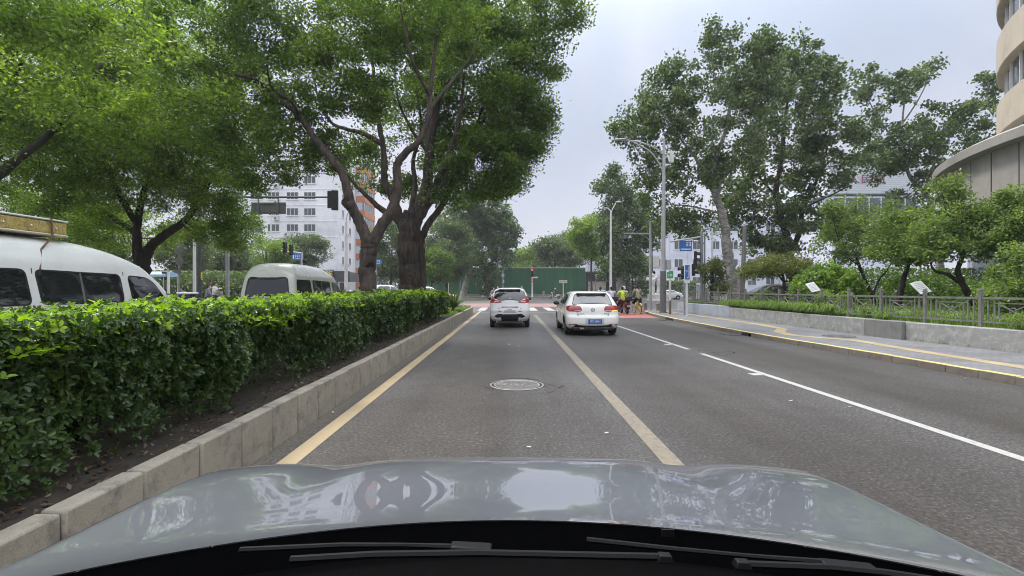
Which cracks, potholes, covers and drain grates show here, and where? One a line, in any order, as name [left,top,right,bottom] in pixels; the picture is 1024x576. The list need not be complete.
manhole cover [490,379,544,391]
